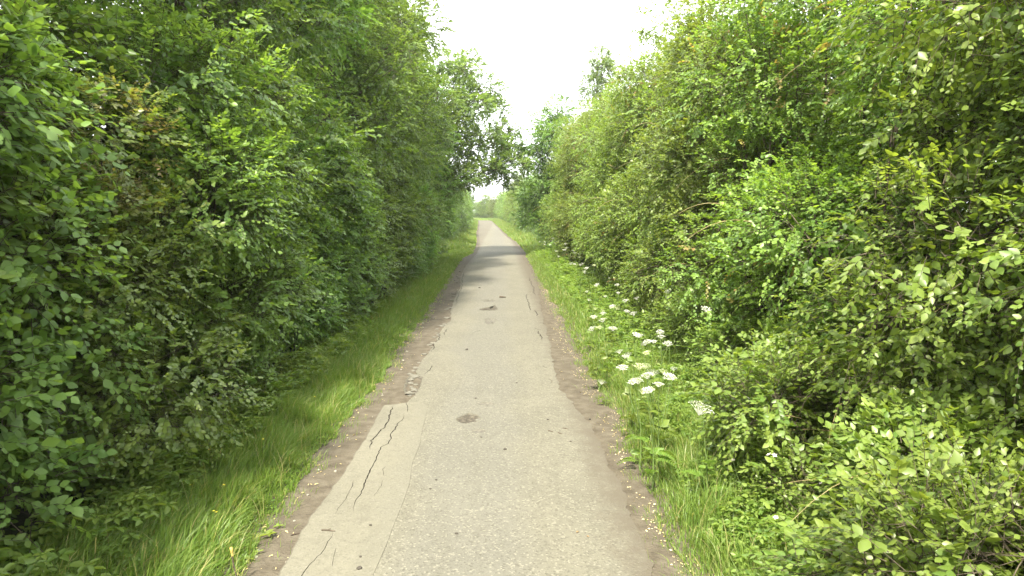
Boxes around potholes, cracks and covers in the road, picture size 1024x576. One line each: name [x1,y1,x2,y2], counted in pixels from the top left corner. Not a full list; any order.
crack [346,404,408,511]
